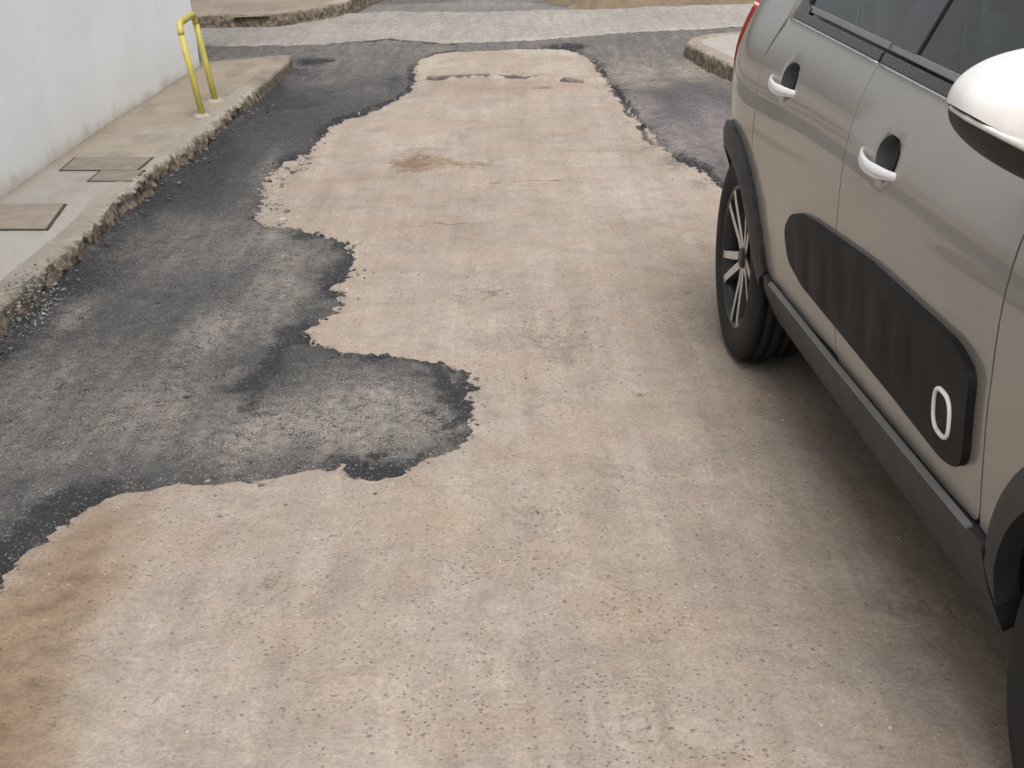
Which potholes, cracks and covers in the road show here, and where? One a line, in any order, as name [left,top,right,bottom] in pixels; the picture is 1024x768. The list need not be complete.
manhole cover [0,204,67,231]
manhole cover [86,170,146,182]
manhole cover [59,157,155,171]
